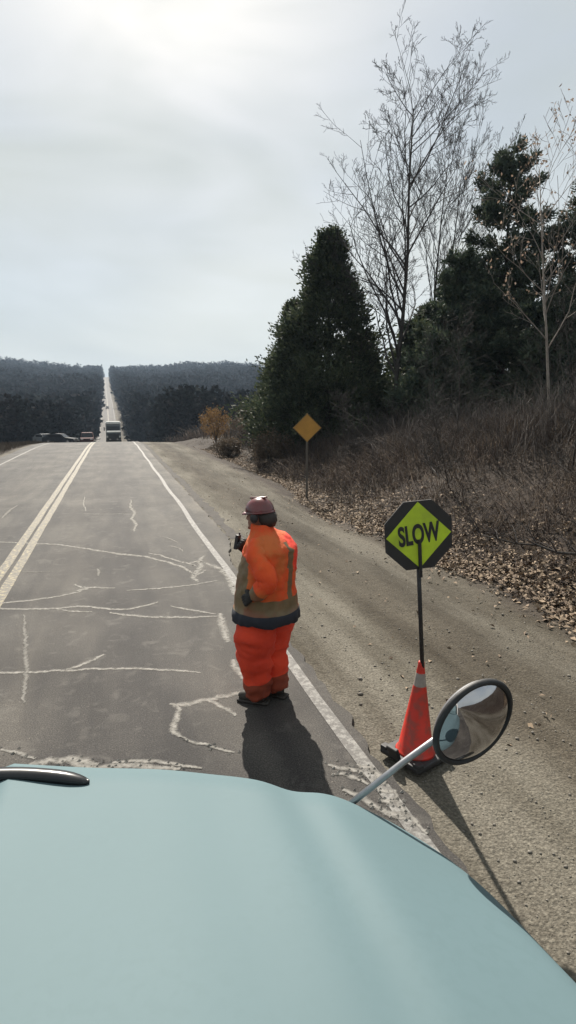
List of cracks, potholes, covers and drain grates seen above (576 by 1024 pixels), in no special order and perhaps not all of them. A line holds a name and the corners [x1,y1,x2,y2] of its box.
crack [0,536,243,770]
crack [325,760,430,834]
crack [82,497,138,531]
